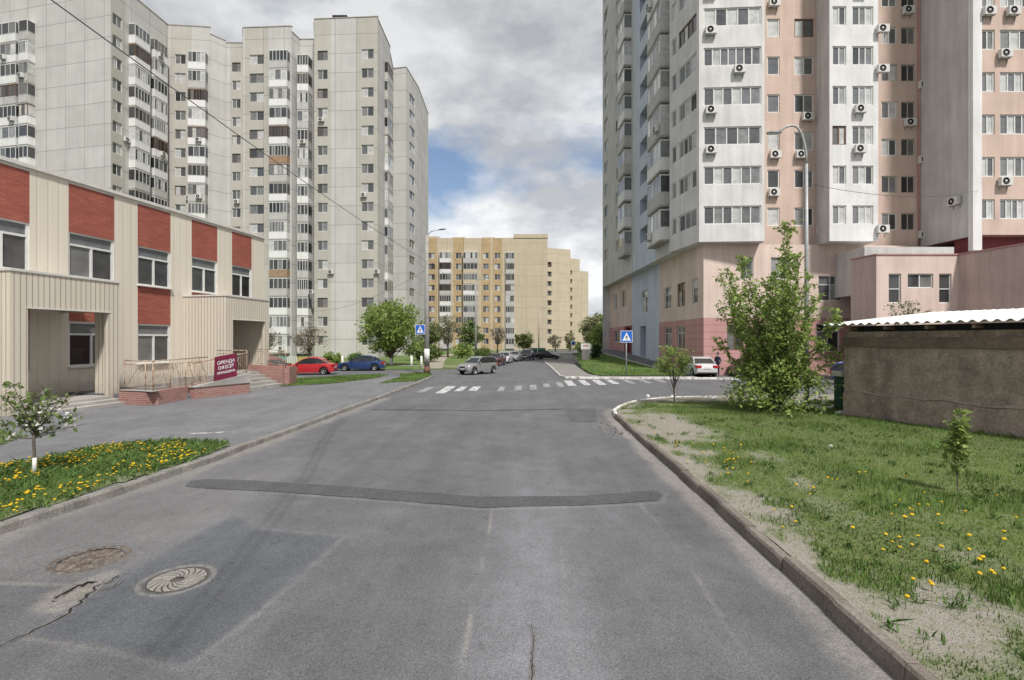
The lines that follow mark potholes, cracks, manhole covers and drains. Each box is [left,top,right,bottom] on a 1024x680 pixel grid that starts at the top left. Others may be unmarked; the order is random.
manhole cover [46,545,132,574]
manhole cover [134,564,218,597]
crack [0,575,124,647]
